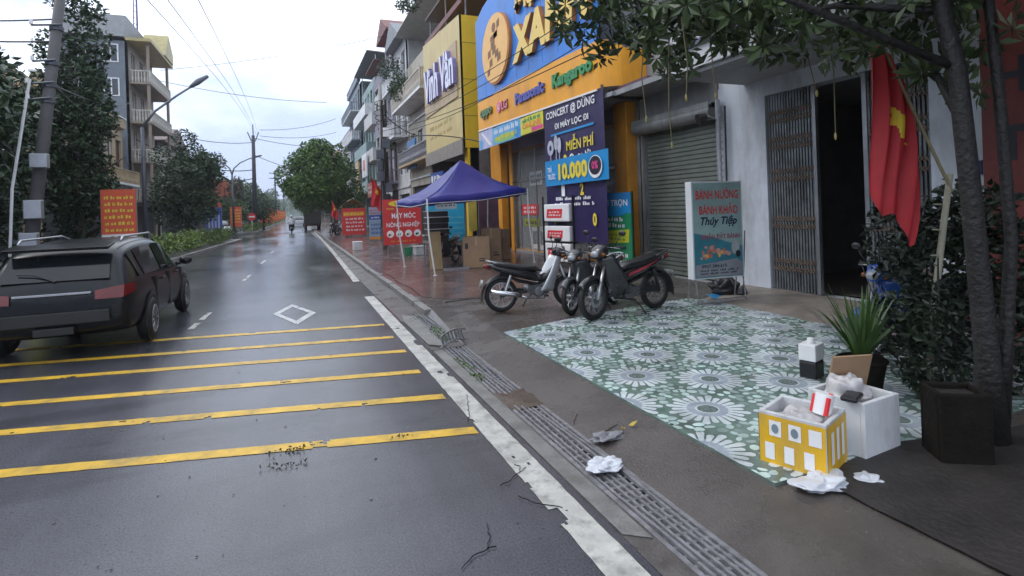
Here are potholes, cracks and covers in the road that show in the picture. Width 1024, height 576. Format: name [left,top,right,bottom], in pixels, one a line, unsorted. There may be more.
drain grate [444,346,526,394]
drain grate [439,327,466,349]
crack [500,464,563,508]
crack [461,524,496,570]
